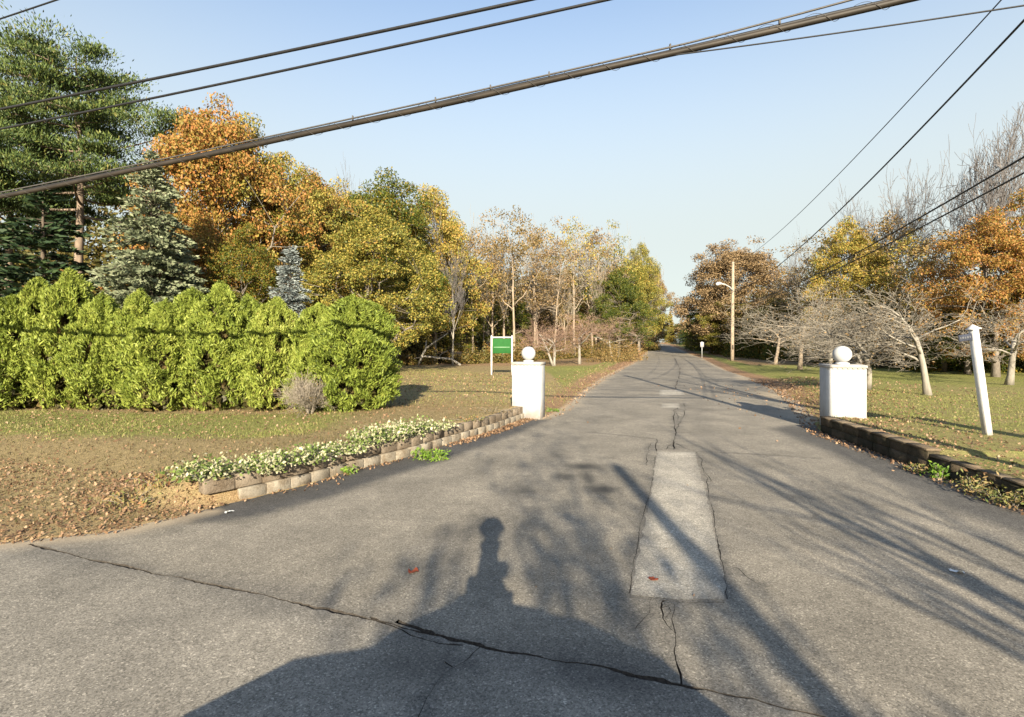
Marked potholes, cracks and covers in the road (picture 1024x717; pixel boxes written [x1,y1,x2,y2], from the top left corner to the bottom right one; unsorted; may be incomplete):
crack [613,359,759,686]
